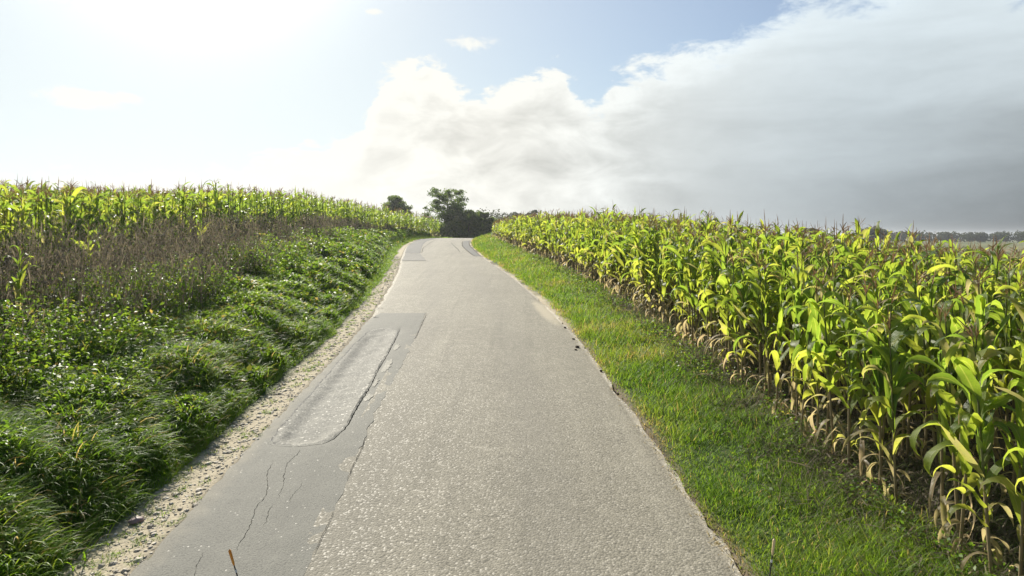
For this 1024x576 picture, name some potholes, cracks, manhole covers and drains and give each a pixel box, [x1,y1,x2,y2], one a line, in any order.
crack [236,330,400,552]
